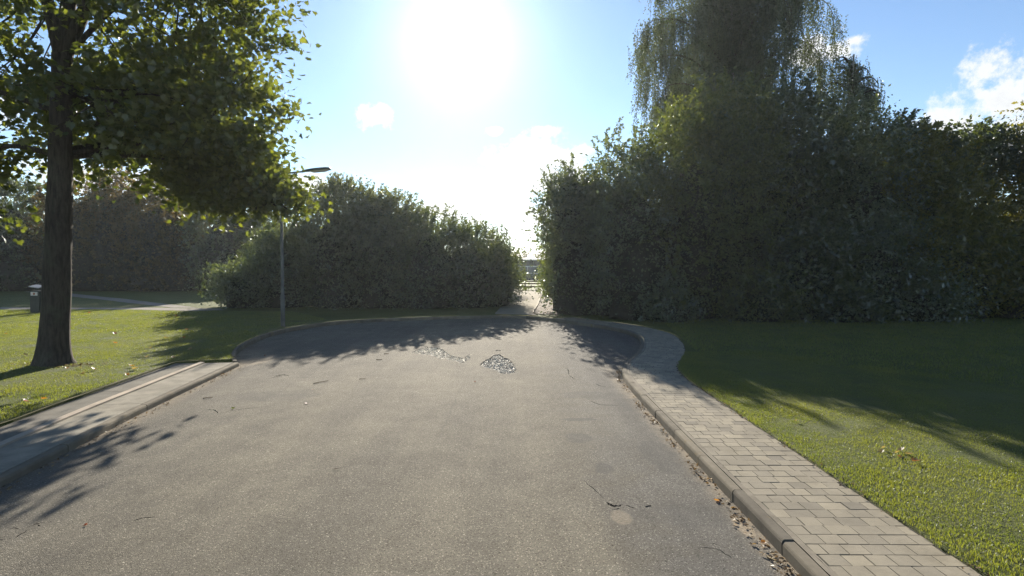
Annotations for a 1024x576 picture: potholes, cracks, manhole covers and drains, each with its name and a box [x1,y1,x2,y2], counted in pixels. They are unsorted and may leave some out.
pothole [412,347,471,363]
pothole [480,354,518,374]
